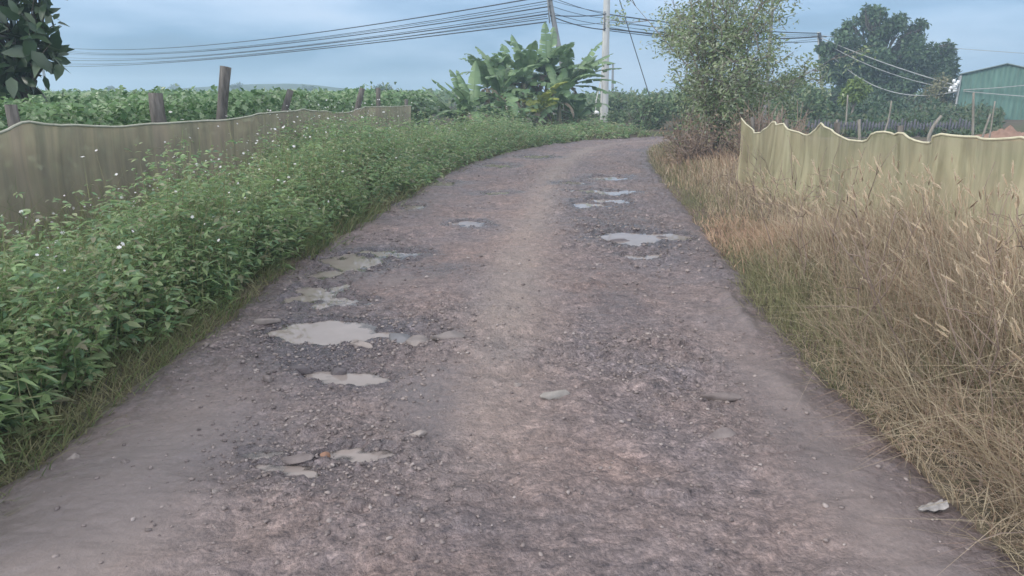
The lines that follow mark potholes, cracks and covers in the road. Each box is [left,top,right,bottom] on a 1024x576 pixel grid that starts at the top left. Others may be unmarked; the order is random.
pothole [444,218,493,228]
pothole [261,314,406,349]
pothole [274,275,376,312]
pothole [566,195,629,208]
pothole [619,251,661,260]
pothole [563,188,639,196]
pothole [296,247,436,281]
pothole [296,363,395,387]
pothole [236,439,400,479]
pothole [592,227,697,248]
